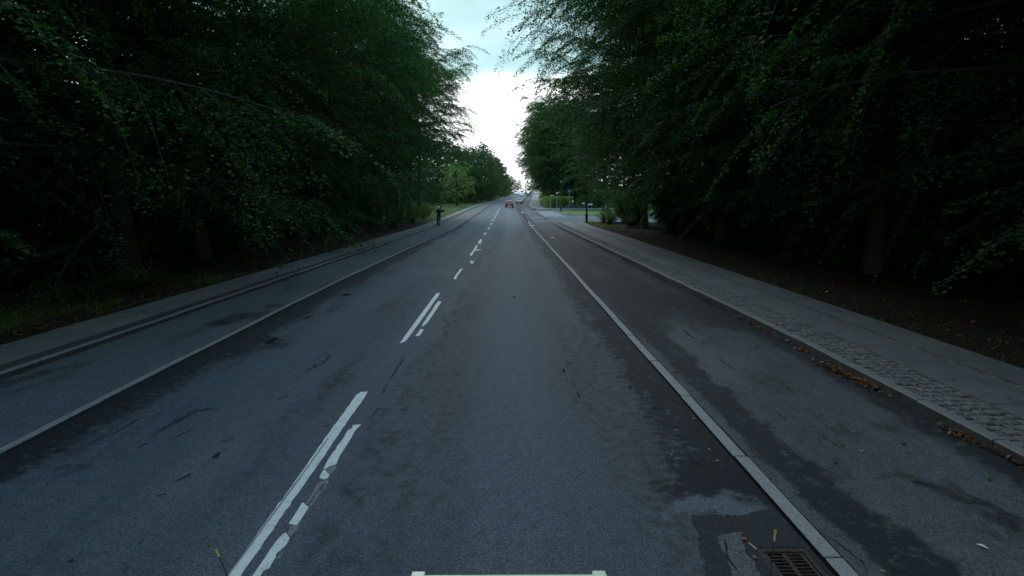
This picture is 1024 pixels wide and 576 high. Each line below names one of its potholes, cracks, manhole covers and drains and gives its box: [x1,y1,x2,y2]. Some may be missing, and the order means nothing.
crack [305,353,335,373]
